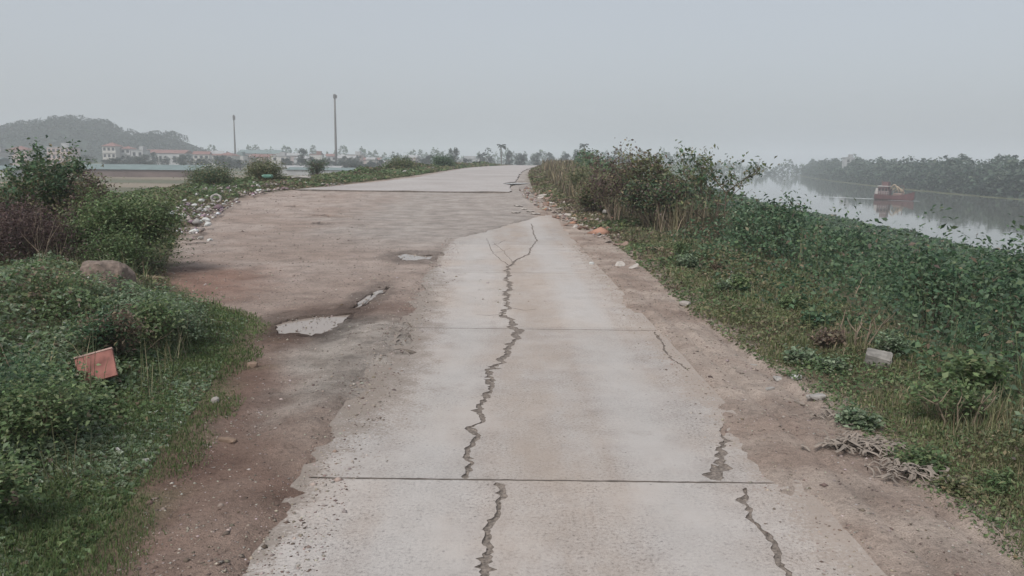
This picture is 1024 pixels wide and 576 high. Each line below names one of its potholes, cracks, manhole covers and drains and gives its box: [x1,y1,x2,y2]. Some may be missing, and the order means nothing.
crack [462,224,537,576]
pothole [349,285,389,311]
crack [654,333,686,369]
pothole [391,252,438,262]
pothole [266,312,357,337]
crack [703,428,792,576]
